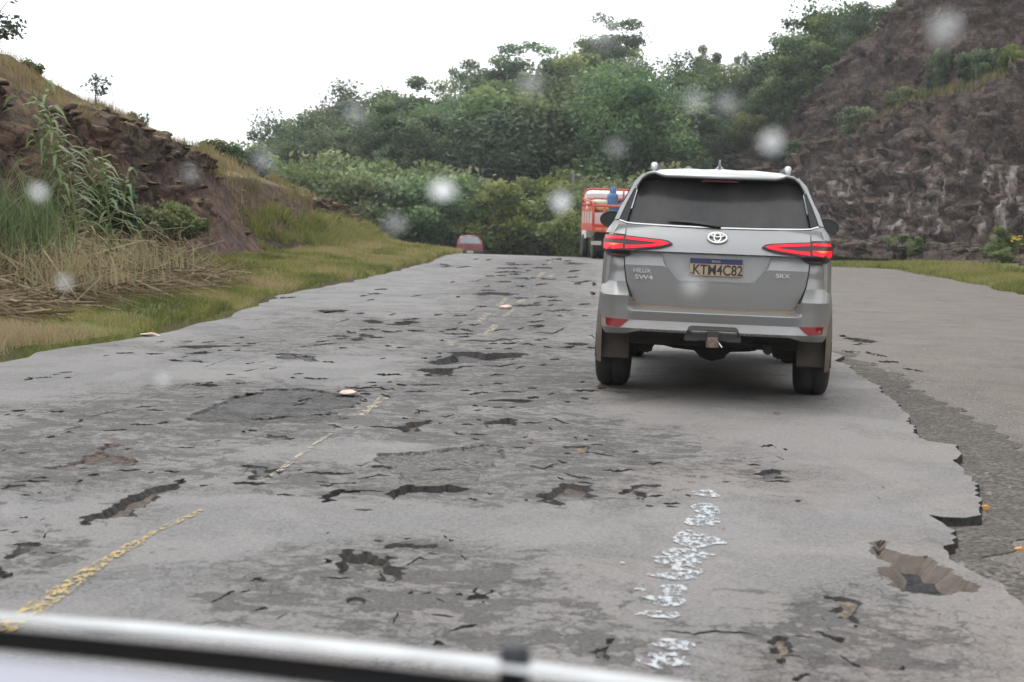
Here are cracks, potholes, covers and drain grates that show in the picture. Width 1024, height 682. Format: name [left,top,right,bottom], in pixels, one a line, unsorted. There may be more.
pothole [748,469,784,480]
pothole [766,636,795,665]
pothole [428,351,529,365]
pothole [43,444,138,469]
pothole [535,483,598,506]
pothole [868,540,981,596]
crack [423,592,463,617]
crack [842,350,924,372]
pothole [839,335,877,345]
crack [646,494,691,507]
pothole [823,595,863,628]
